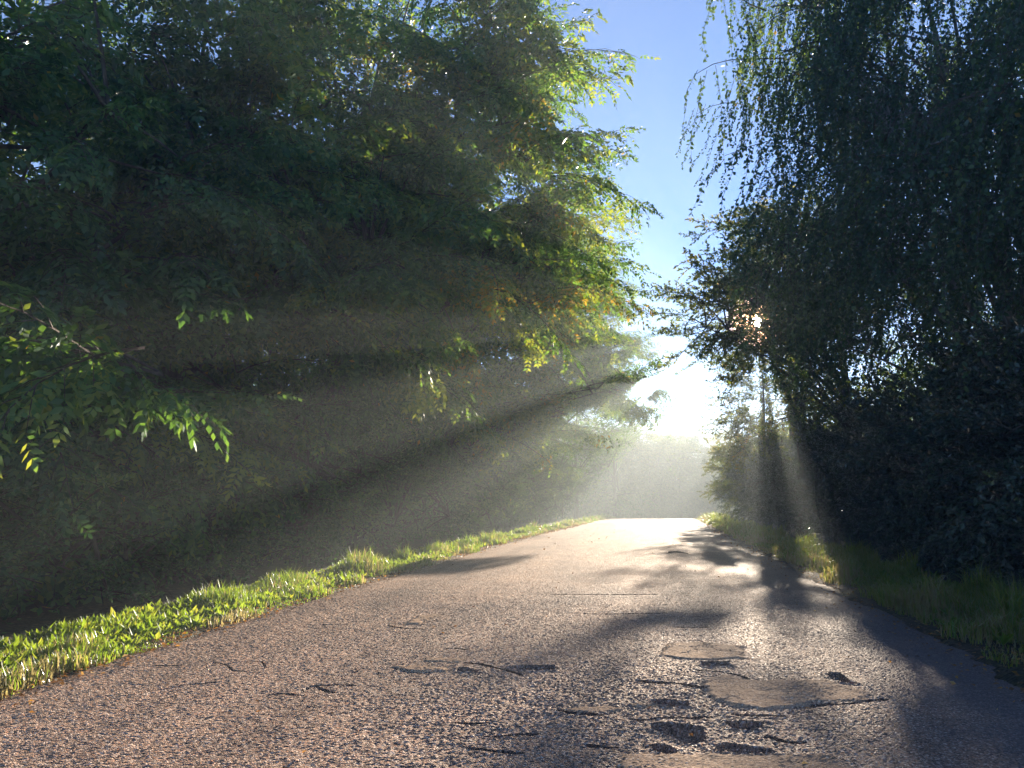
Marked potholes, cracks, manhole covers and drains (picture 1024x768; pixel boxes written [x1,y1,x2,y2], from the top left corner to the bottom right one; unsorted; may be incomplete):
pothole [650,721,709,744]
pothole [649,743,680,753]
pothole [724,719,772,730]
pothole [715,742,779,754]
crack [269,684,358,696]
pothole [824,671,860,684]
pothole [651,697,691,707]
crack [154,661,266,690]
